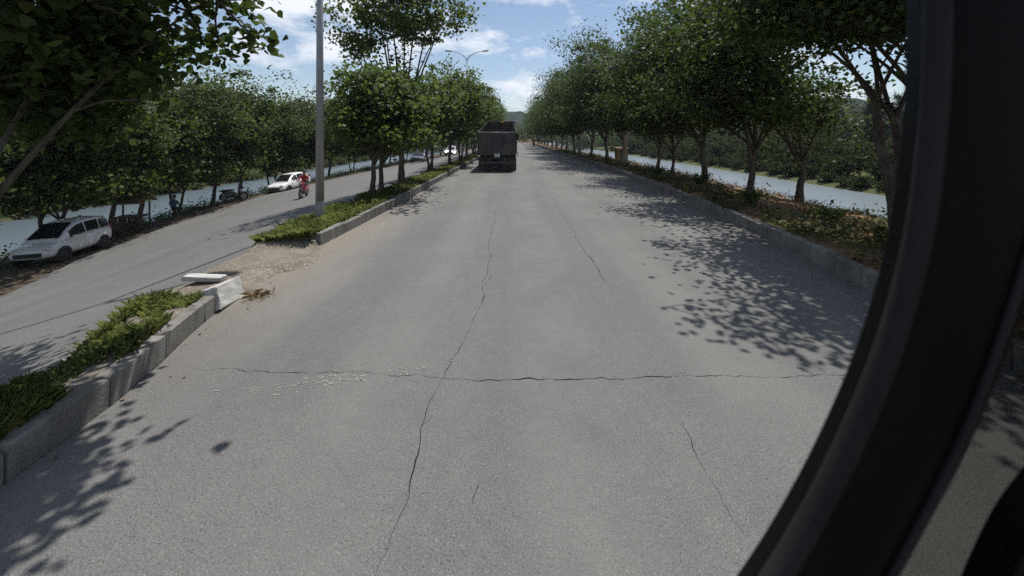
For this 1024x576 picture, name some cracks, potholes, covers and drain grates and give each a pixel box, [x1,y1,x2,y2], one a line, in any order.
crack [192,212,842,576]
